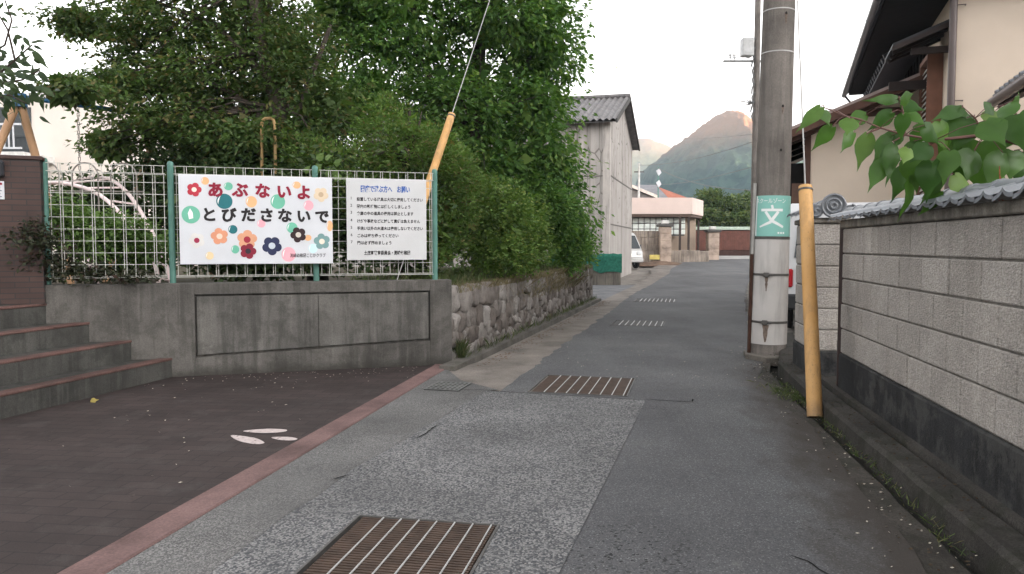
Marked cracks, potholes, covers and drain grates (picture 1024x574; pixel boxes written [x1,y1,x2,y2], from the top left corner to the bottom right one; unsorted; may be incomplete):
drain grate [527,375,636,397]
drain grate [293,514,500,574]
